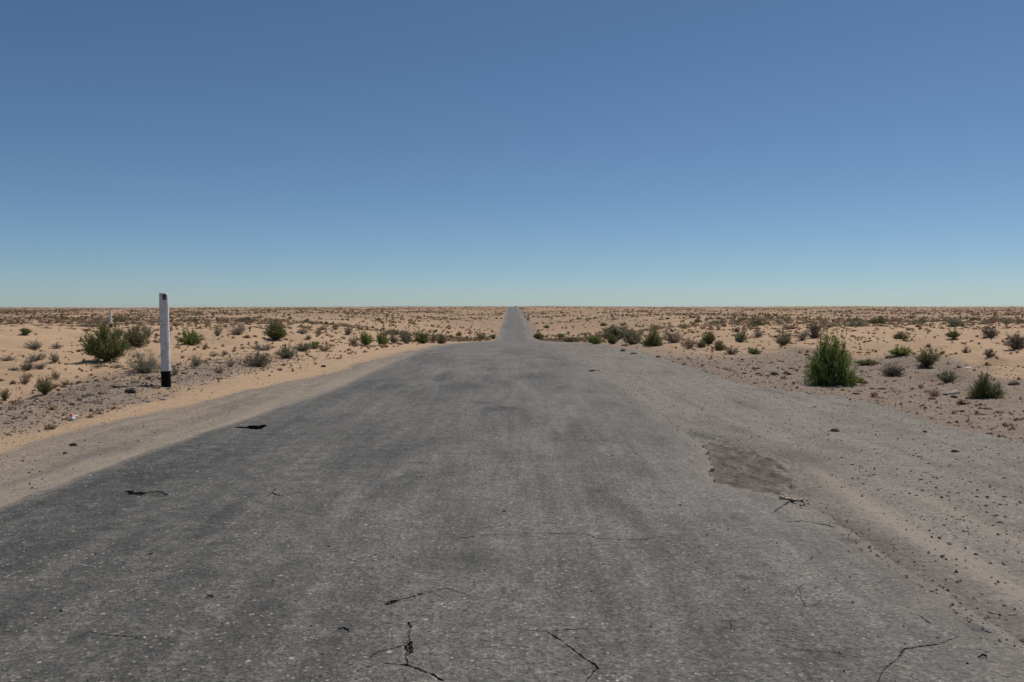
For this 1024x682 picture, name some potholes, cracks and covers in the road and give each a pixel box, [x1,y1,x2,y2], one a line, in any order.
crack [774,614,959,682]
crack [368,588,468,682]
crack [773,500,833,527]
crack [527,628,599,682]
